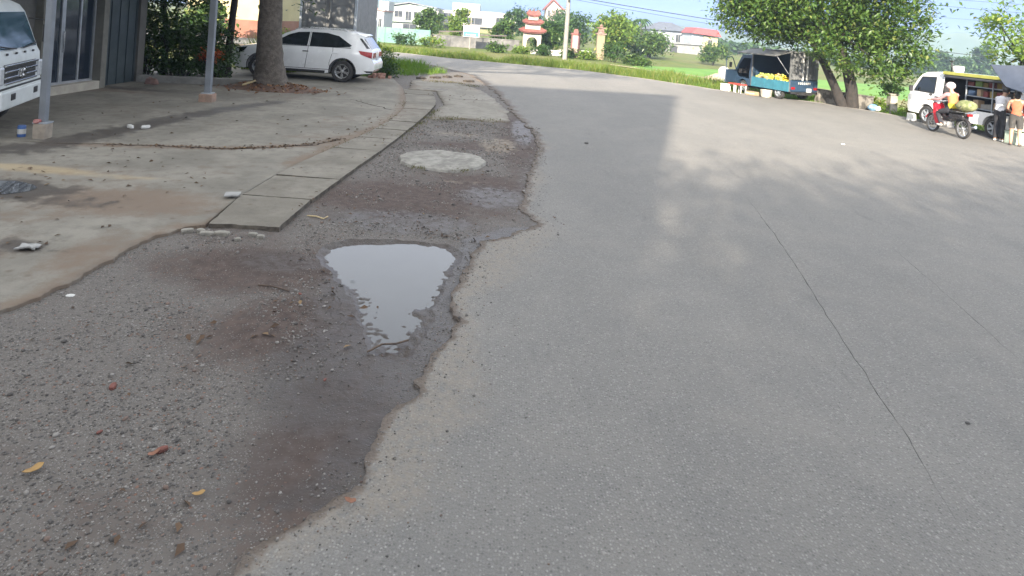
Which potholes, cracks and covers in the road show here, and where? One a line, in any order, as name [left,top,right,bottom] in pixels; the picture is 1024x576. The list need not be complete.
crack [756,210,956,520]
manhole cover [399,150,487,173]
pothole [316,238,463,363]
